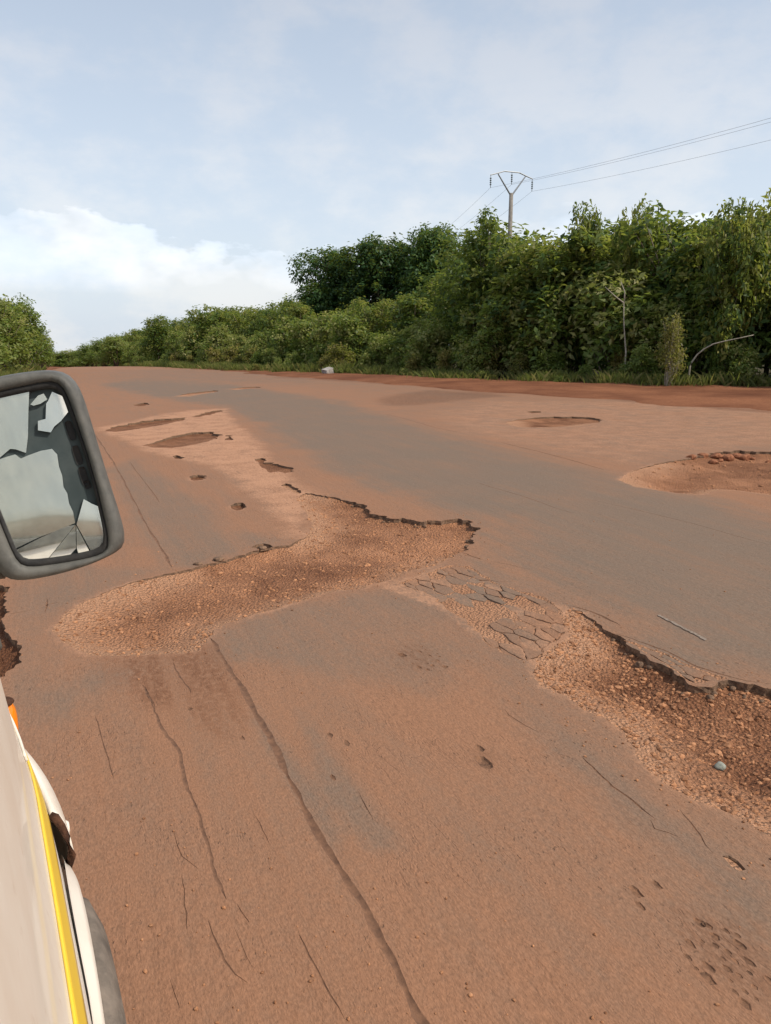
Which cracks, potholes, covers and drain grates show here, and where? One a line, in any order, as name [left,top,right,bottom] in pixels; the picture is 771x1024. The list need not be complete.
pothole [52,493,481,656]
pothole [534,609,771,837]
pothole [142,432,222,448]
pothole [619,450,771,495]
crack [143,552,768,1024]
pothole [106,417,187,432]
pothole [255,458,294,473]
pothole [506,416,601,428]
